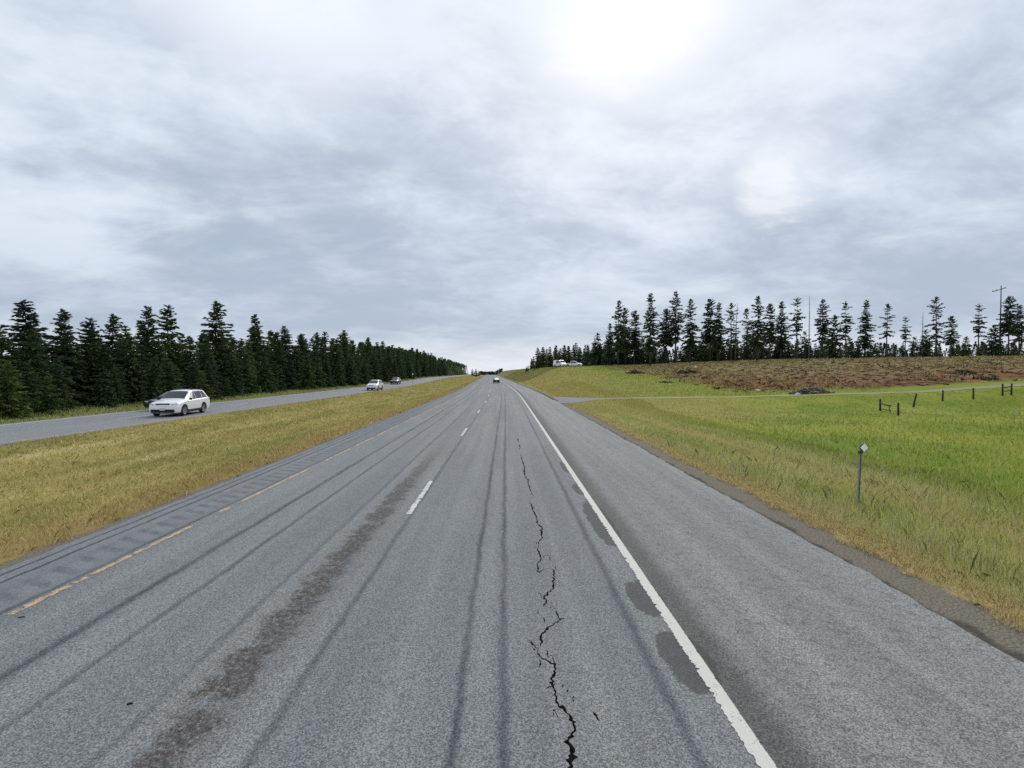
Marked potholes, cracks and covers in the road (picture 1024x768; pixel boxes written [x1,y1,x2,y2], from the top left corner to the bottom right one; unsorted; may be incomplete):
crack [517,439,600,768]
